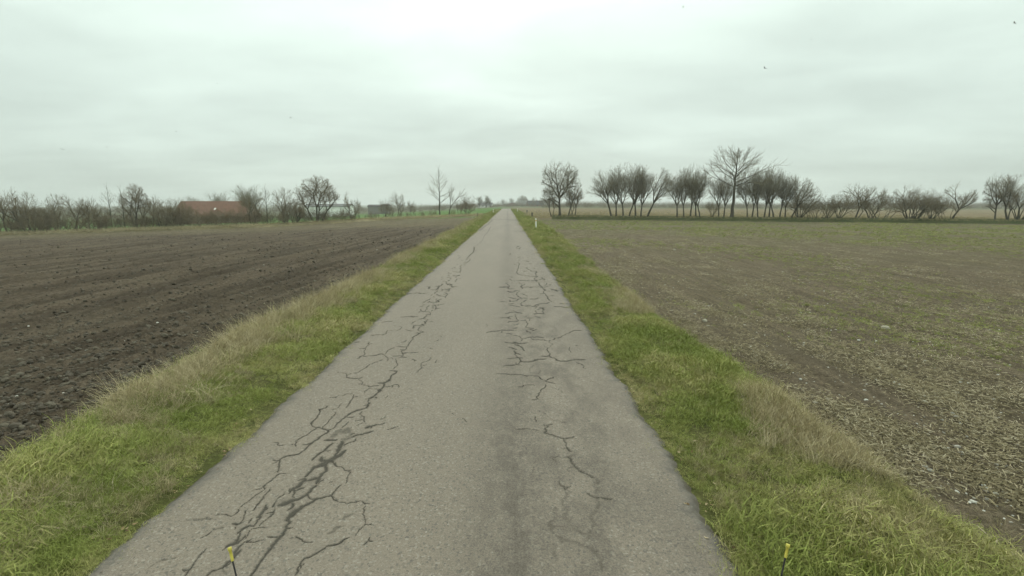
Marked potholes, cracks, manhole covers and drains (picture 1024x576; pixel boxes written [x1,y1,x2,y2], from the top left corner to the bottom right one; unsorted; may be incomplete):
crack [519,417,611,500]
crack [182,249,476,576]
crack [486,246,585,400]
